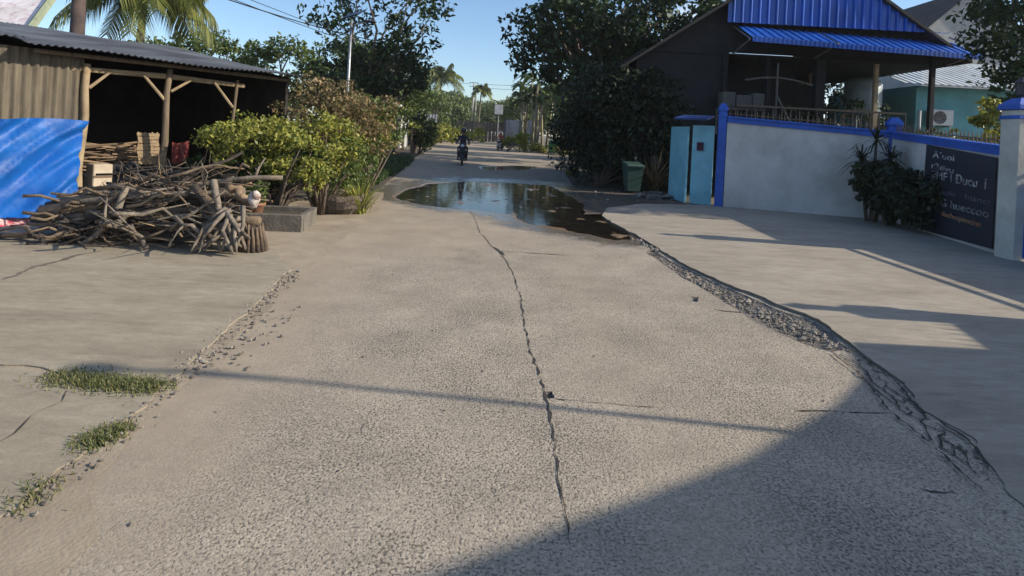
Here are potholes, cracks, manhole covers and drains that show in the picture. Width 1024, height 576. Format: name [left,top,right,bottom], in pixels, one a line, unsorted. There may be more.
crack [796,345,991,493]
crack [474,218,663,544]
crack [3,392,66,440]
pothole [391,181,639,241]
